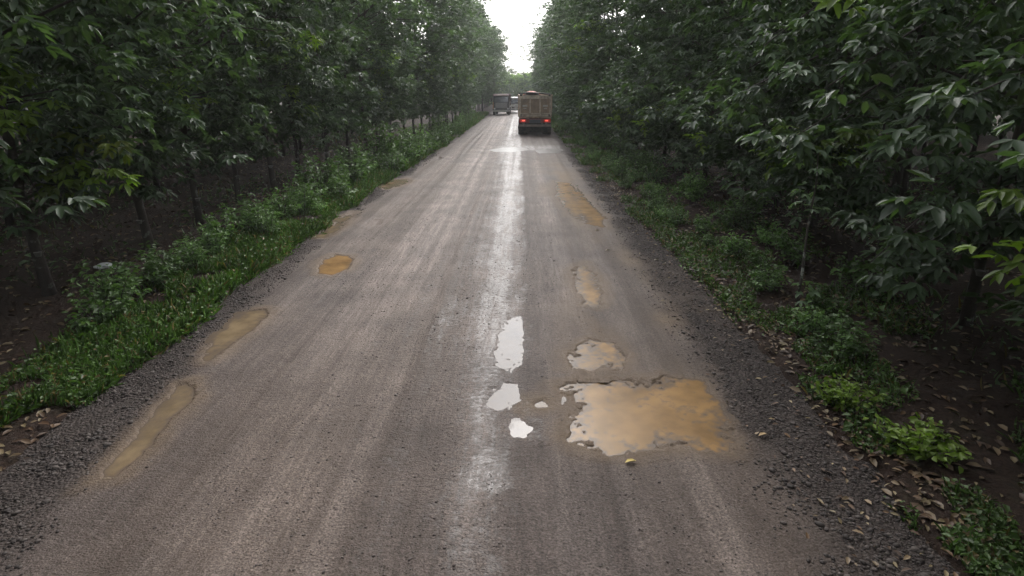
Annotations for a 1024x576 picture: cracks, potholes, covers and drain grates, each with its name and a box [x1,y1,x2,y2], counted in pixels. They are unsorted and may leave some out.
pothole [539,368,758,465]
pothole [62,374,212,497]
pothole [546,179,616,229]
pothole [187,305,283,367]
pothole [375,177,421,191]
pothole [561,259,616,312]
pothole [551,333,641,383]
pothole [305,209,367,241]
pothole [307,252,364,278]
